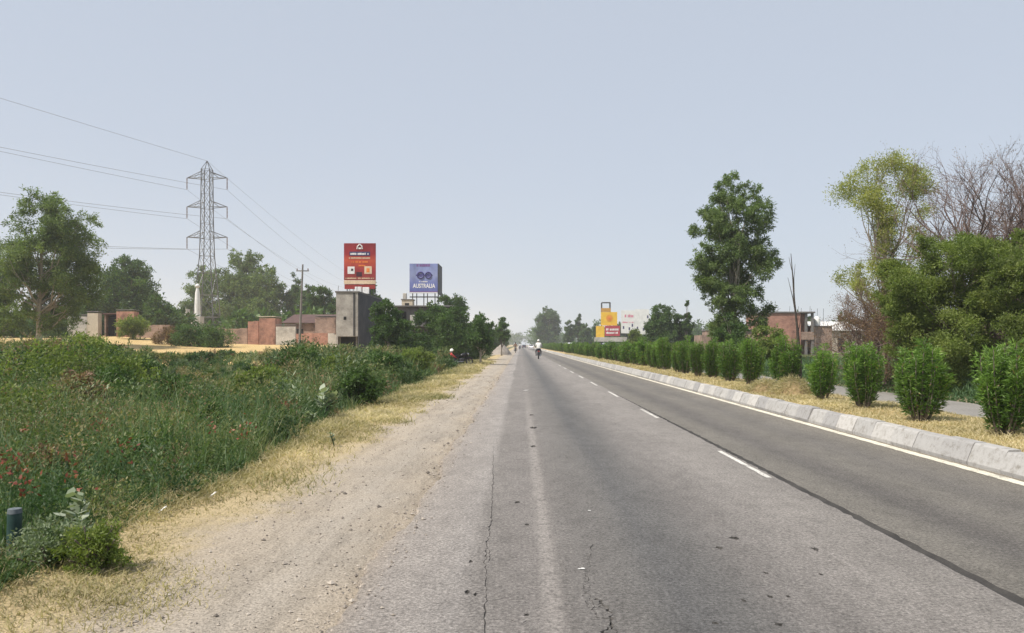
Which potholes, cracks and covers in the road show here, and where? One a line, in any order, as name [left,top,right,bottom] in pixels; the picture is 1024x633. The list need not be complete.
crack [582,544,618,633]
crack [483,449,509,633]
